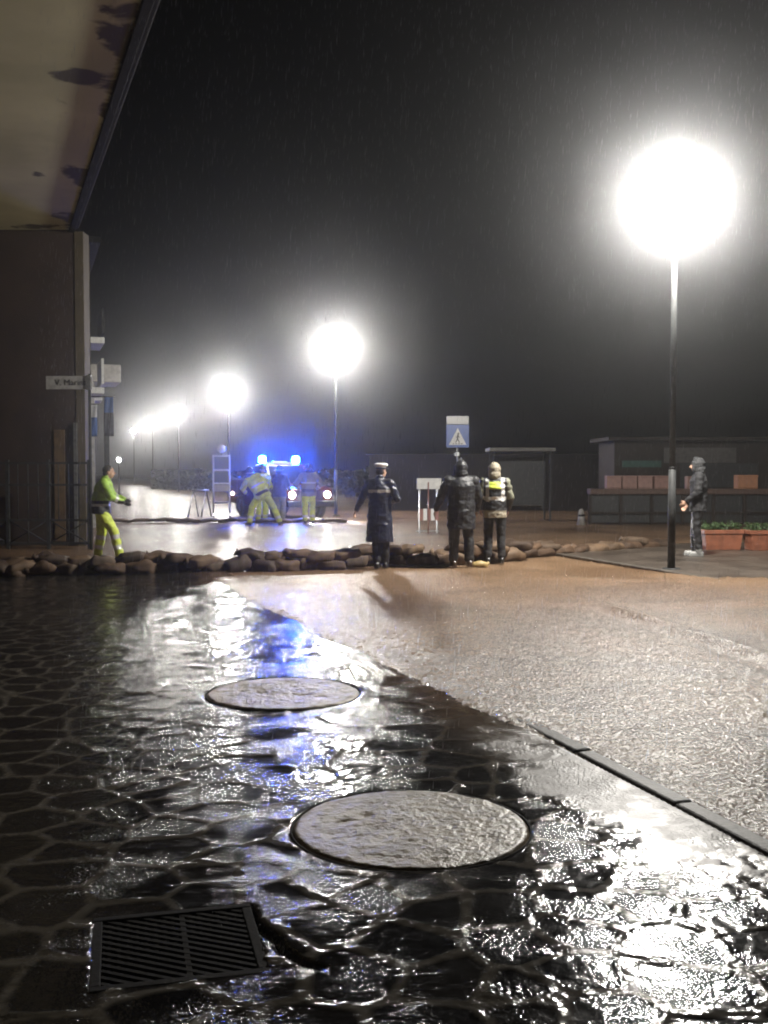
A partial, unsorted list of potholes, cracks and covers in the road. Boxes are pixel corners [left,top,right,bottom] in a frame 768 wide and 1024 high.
manhole cover [205,678,361,711]
drain grate [89,903,269,993]
manhole cover [290,790,532,873]
